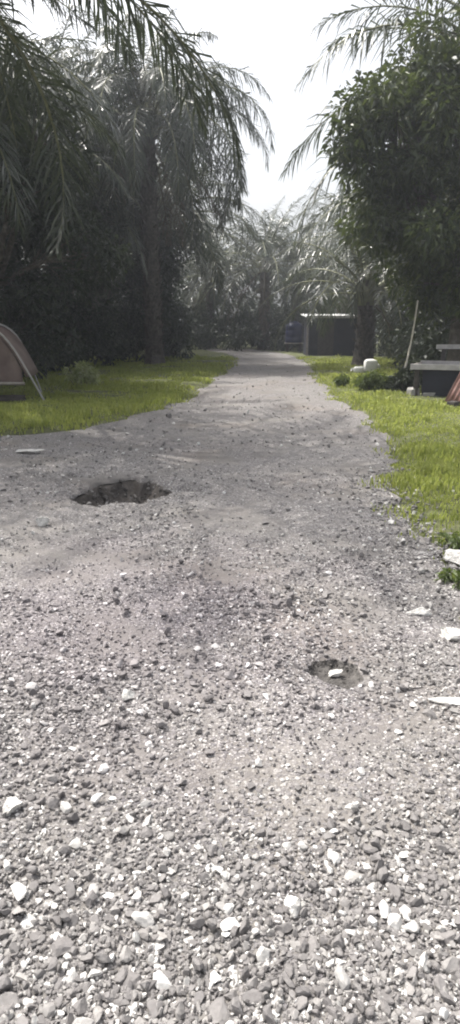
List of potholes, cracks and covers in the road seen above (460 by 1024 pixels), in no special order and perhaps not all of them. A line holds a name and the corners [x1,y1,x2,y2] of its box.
pothole [308,659,364,690]
pothole [72,479,173,507]
